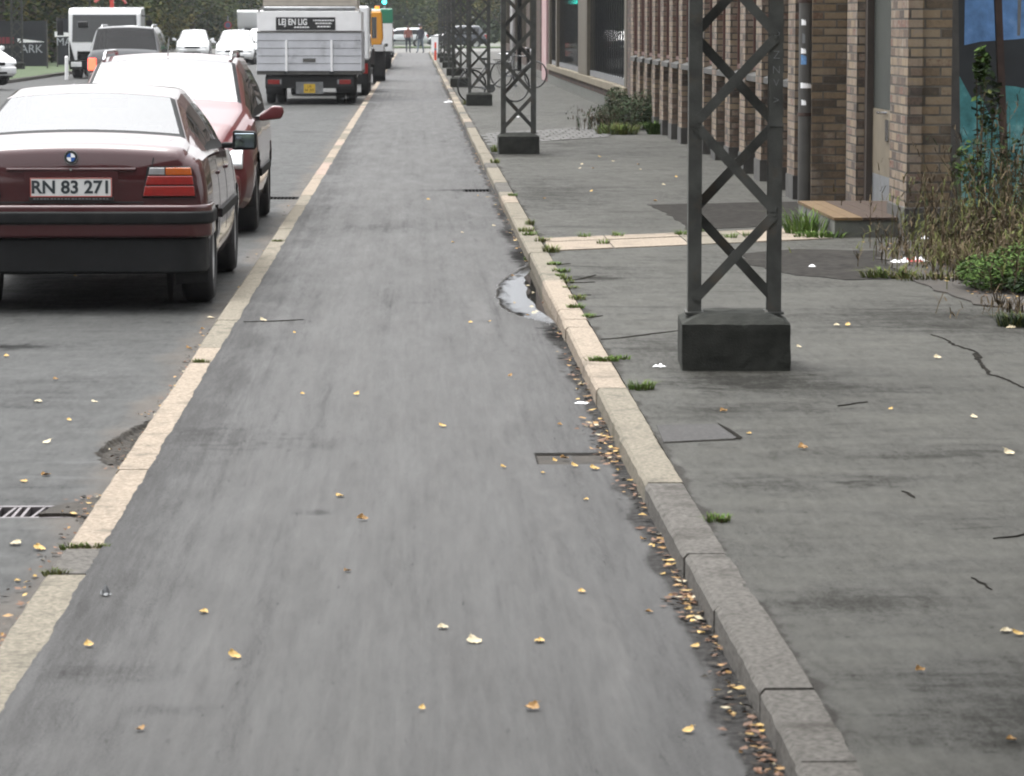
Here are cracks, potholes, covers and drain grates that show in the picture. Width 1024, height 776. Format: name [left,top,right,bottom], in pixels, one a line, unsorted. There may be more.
drain grate [0,505,67,518]
pothole [93,419,152,468]
crack [930,334,1024,388]
drain grate [534,453,607,464]
